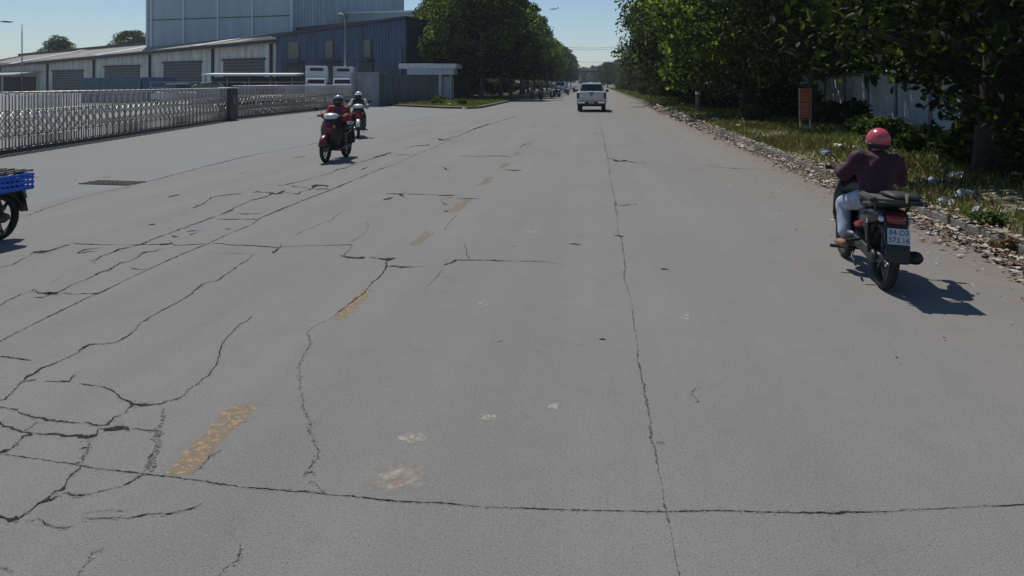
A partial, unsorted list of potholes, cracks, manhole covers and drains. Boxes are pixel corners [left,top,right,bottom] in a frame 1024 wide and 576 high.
crack [338,249,564,312]
crack [0,136,453,530]
